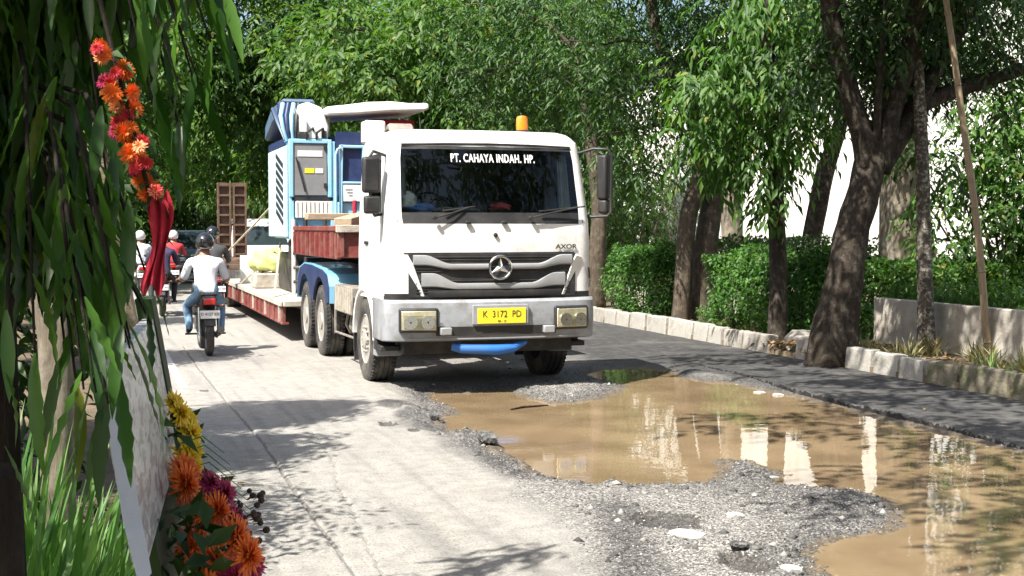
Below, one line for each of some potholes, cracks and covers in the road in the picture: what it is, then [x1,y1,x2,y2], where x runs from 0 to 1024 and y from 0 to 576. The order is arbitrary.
pothole [426,366,1024,576]
